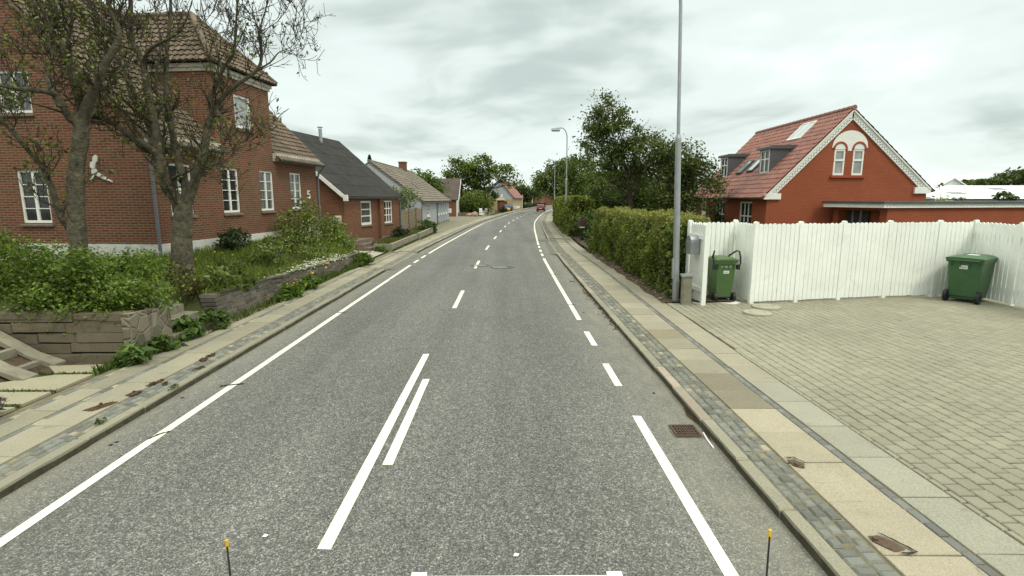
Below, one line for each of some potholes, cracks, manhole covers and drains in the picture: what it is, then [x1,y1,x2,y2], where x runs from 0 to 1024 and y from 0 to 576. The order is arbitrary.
drain grate [668,424,703,438]
manhole cover [743,309,773,317]
manhole cover [751,303,781,311]
